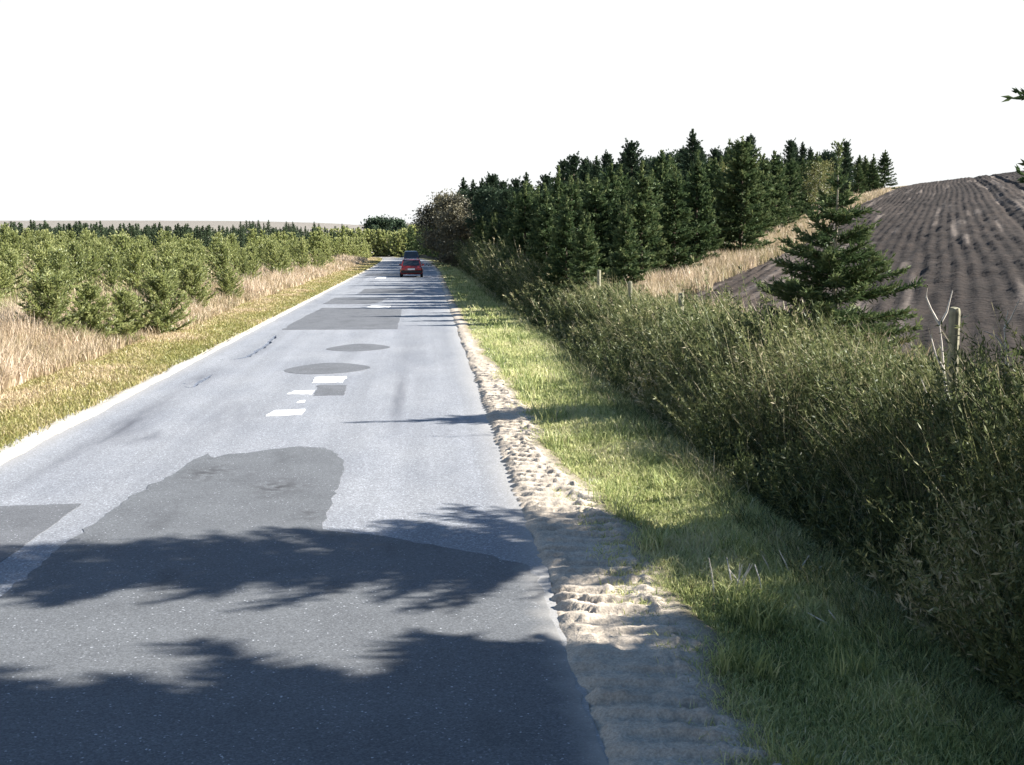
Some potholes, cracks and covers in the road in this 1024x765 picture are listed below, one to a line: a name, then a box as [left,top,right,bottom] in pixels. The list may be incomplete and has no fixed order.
crack [238,335,276,359]
crack [184,375,212,388]
